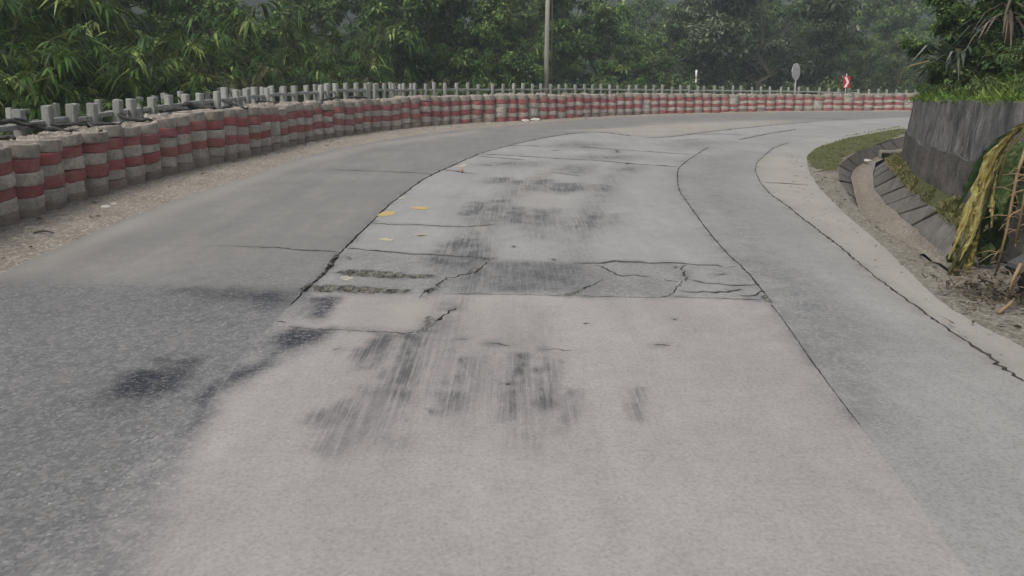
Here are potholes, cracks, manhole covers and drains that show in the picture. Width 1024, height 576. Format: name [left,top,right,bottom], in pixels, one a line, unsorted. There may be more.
crack [210,245,487,321]
crack [582,260,768,298]
